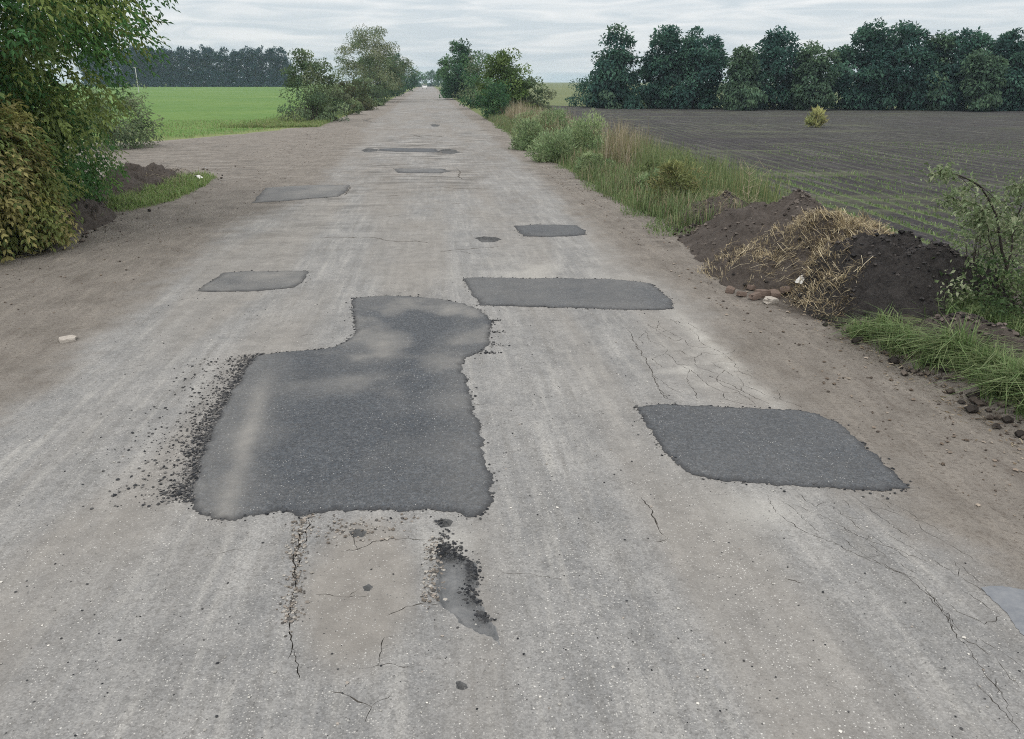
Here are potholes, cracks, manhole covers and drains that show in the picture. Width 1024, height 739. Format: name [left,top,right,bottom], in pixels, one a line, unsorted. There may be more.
crack [766,492,1023,734]
crack [626,319,802,408]
pothole [434,544,500,645]
crack [630,481,668,542]
crack [288,522,310,678]
crack [332,691,390,721]
